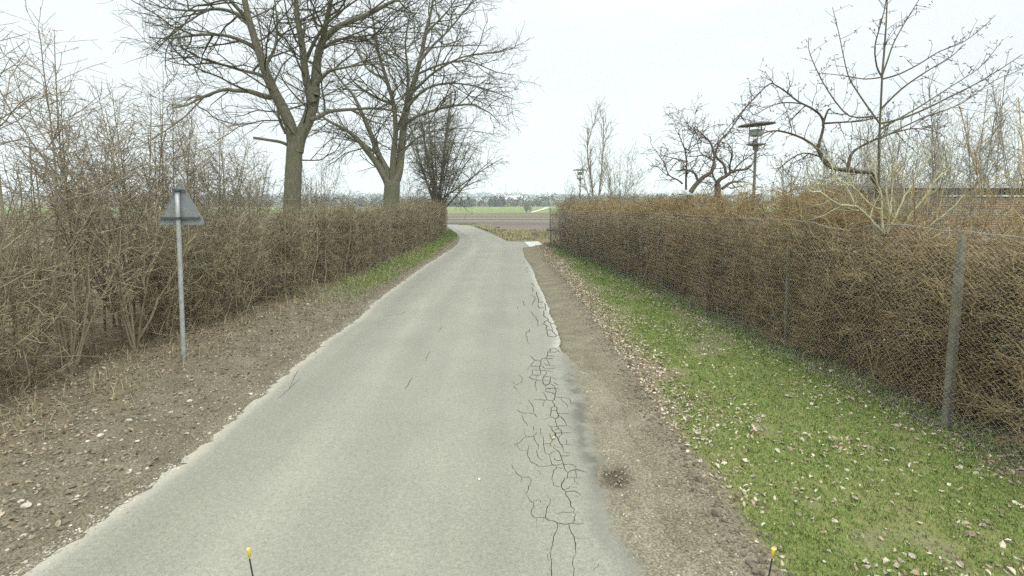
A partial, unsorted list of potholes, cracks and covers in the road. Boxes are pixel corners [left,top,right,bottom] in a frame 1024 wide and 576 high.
crack [523,268,557,337]
crack [512,348,599,576]
pothole [595,462,642,492]
